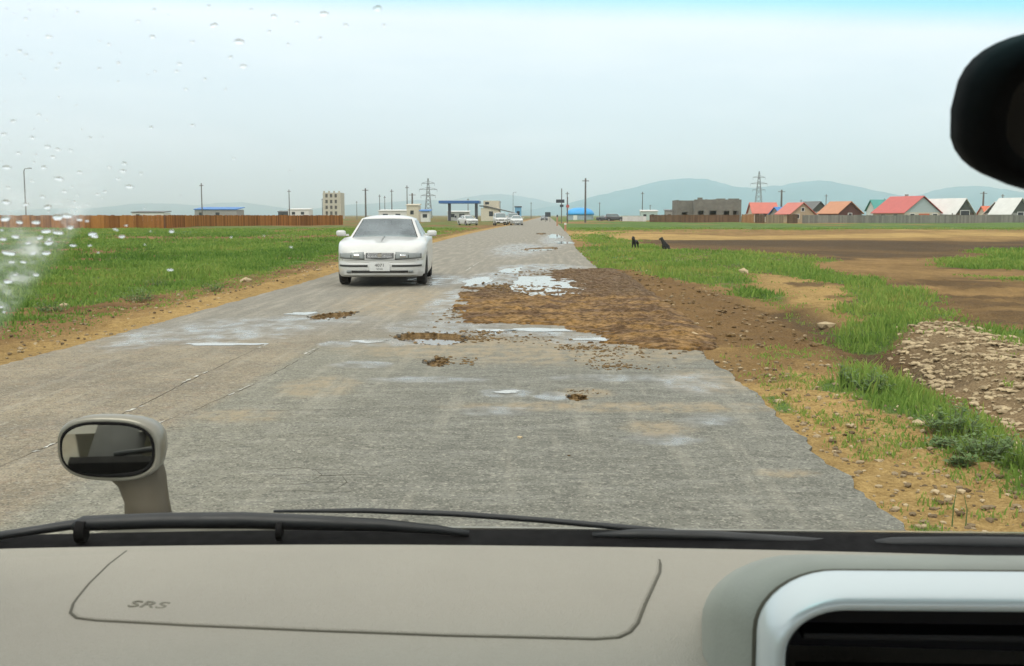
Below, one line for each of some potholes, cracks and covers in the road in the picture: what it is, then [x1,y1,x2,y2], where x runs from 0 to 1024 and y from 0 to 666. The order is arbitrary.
pothole [421,355,453,367]
crack [271,467,374,493]
pothole [307,311,359,320]
pothole [566,393,589,401]
pothole [389,331,472,346]
